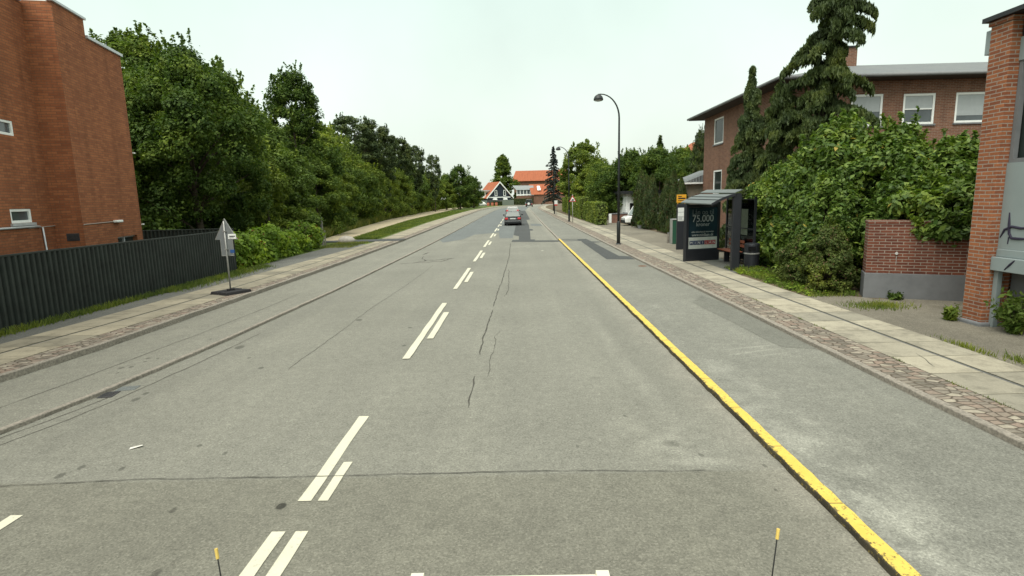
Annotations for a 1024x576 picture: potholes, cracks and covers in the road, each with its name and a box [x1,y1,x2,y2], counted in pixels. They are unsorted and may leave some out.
crack [468,244,511,407]
